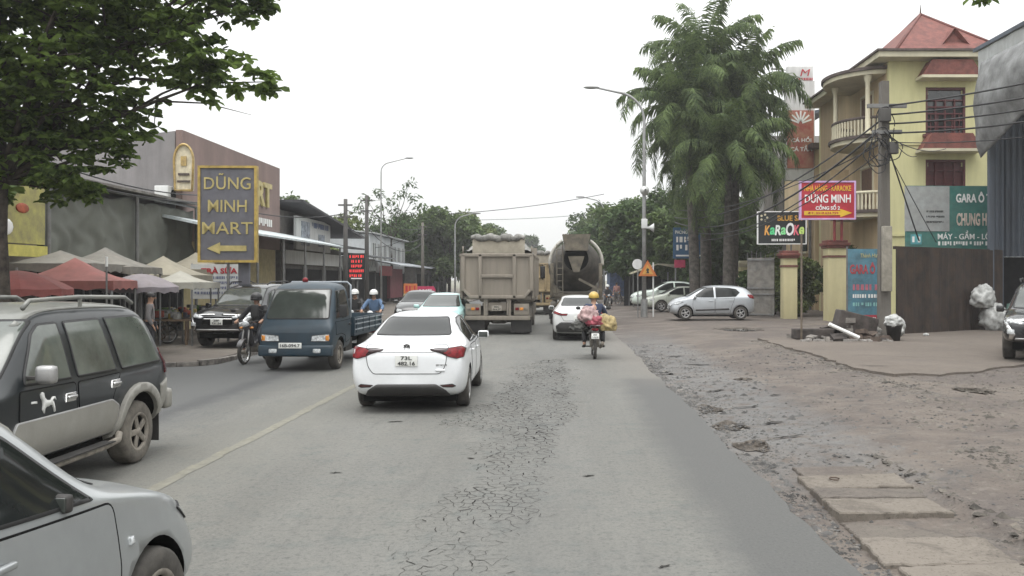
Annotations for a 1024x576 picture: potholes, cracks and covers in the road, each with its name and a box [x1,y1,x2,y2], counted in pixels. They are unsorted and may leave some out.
crack [380,359,583,576]
pothole [711,420,749,431]
pothole [731,440,770,453]
pothole [952,387,996,395]
